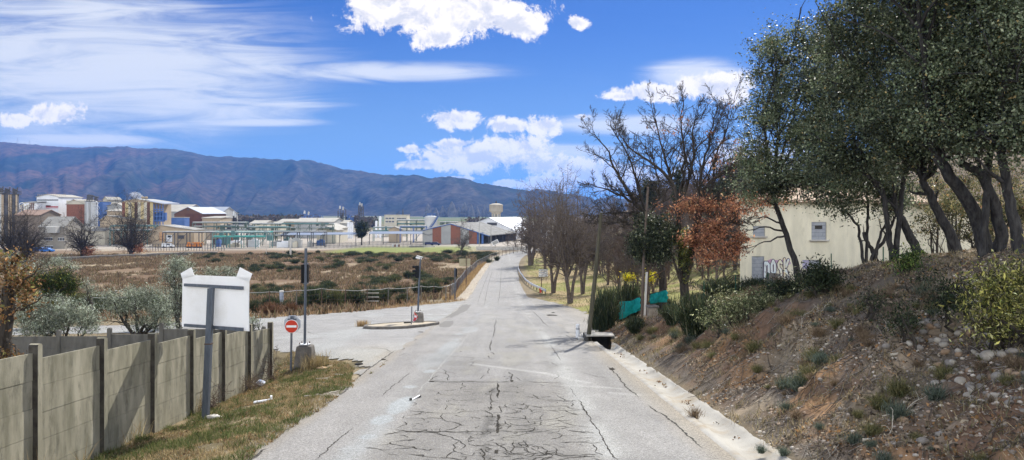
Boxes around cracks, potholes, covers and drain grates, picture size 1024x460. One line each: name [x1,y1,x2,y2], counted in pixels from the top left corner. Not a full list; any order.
drain grate [583,332,616,349]
crack [368,265,701,460]
